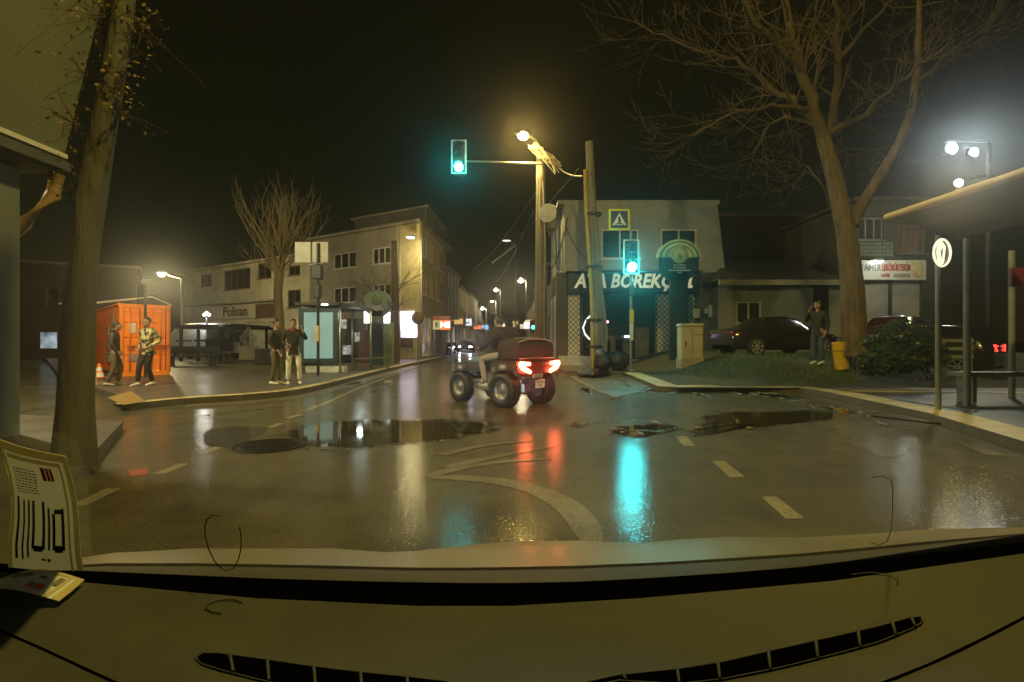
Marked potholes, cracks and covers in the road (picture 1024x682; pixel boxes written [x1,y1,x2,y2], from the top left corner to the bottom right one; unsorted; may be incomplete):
crack [781,392,914,430]
pothole [603,427,644,437]
manhole cover [229,438,307,453]
